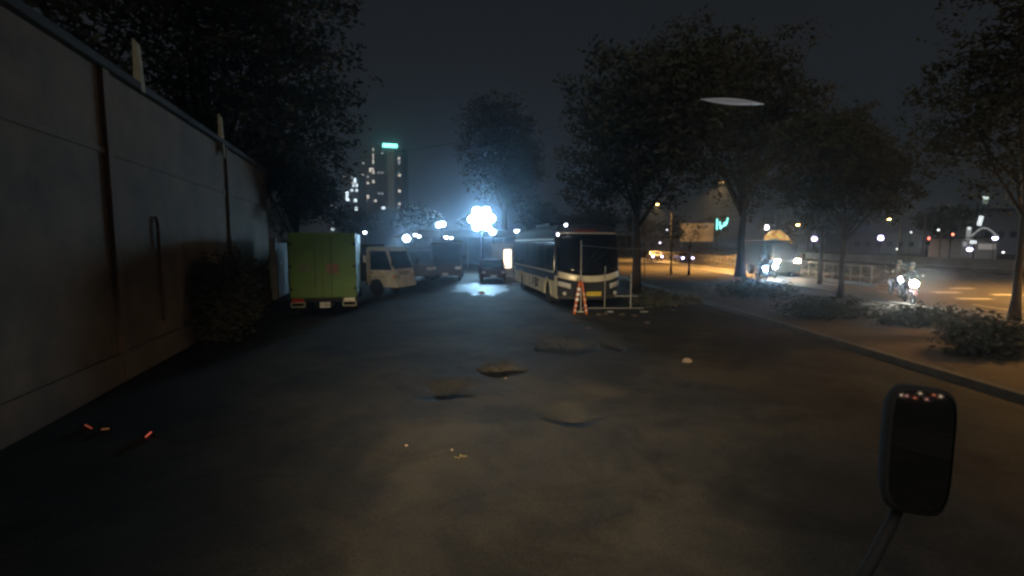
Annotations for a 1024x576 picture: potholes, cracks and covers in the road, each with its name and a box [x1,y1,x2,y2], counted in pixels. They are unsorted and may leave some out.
pothole [525,332,600,356]
pothole [531,401,610,428]
pothole [410,375,487,402]
pothole [476,359,530,378]
pothole [597,339,627,352]
